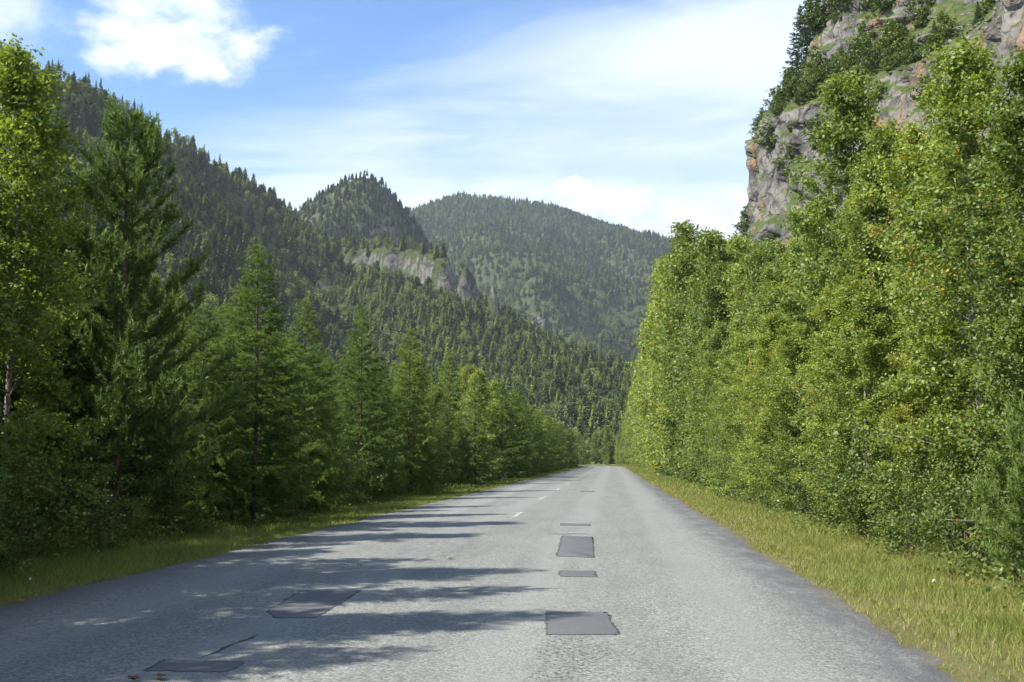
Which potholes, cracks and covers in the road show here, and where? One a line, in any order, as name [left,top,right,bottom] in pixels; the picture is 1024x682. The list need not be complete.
crack [202,634,259,657]
